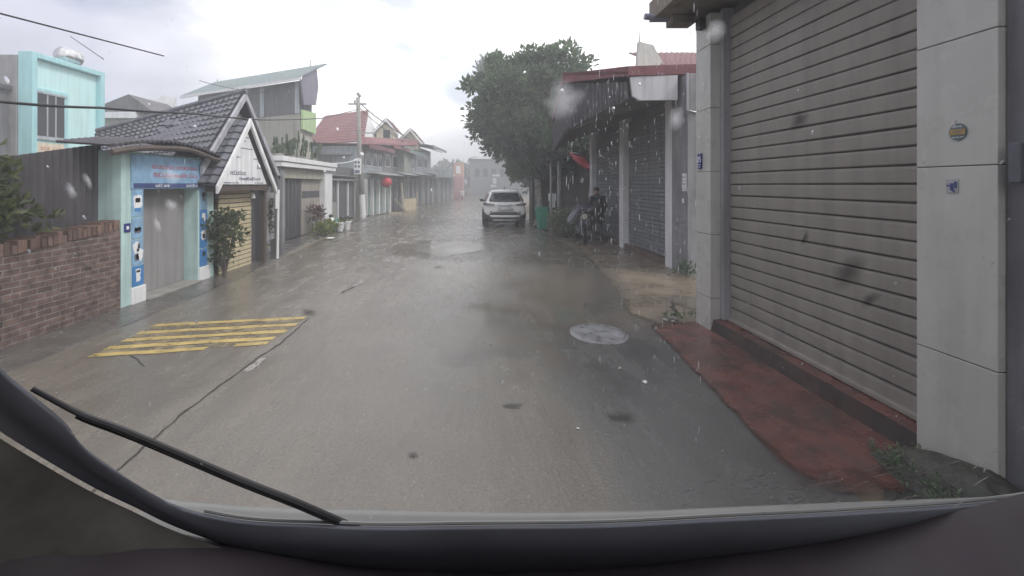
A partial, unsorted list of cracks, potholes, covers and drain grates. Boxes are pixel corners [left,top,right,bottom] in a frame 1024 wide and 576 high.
manhole cover [570,323,629,344]
